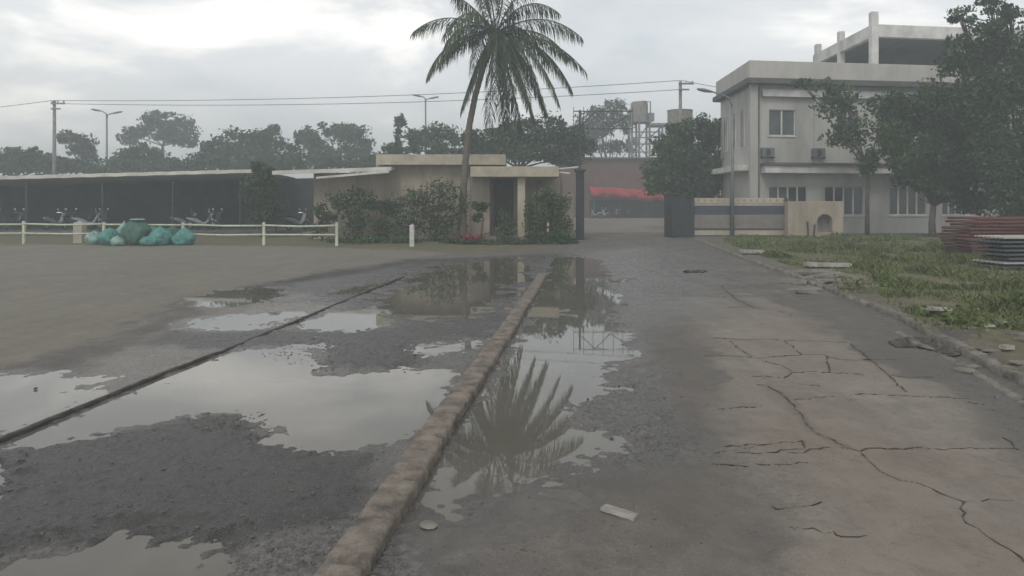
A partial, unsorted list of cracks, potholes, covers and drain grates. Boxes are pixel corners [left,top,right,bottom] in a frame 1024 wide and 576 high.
crack [705,338,1024,562]
